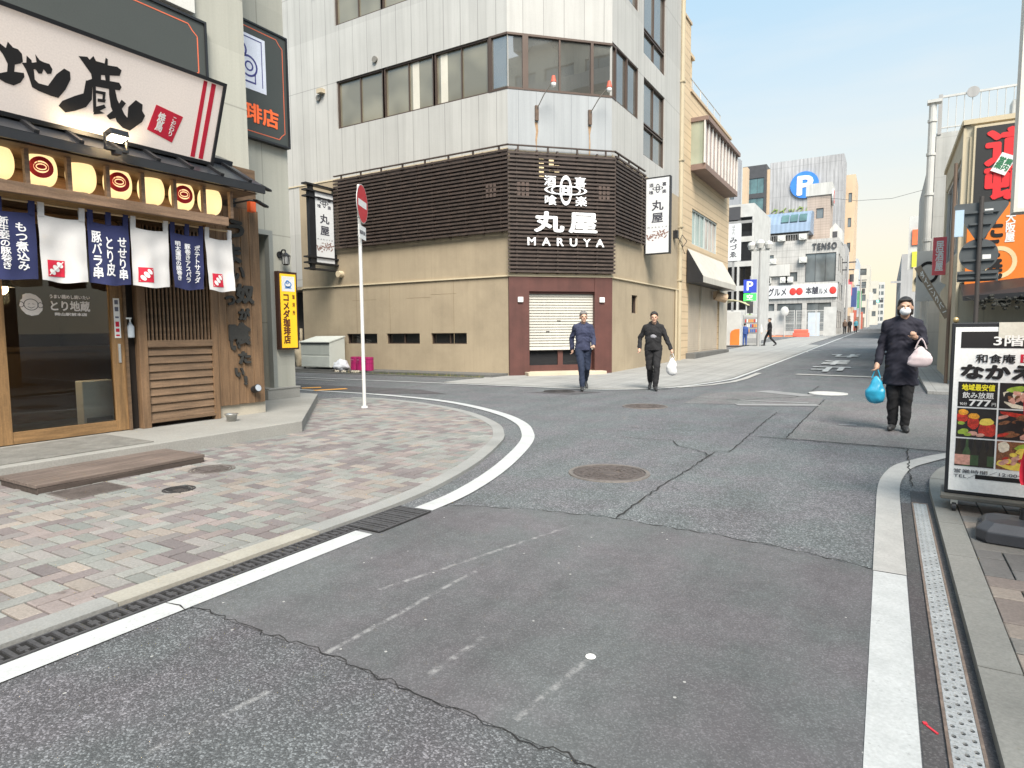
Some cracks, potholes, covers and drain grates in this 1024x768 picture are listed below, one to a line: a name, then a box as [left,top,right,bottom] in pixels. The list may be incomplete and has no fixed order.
manhole cover [188,464,236,475]
crack [616,412,945,518]
manhole cover [568,464,650,483]
drain grate [347,505,431,532]
manhole cover [162,485,196,493]
